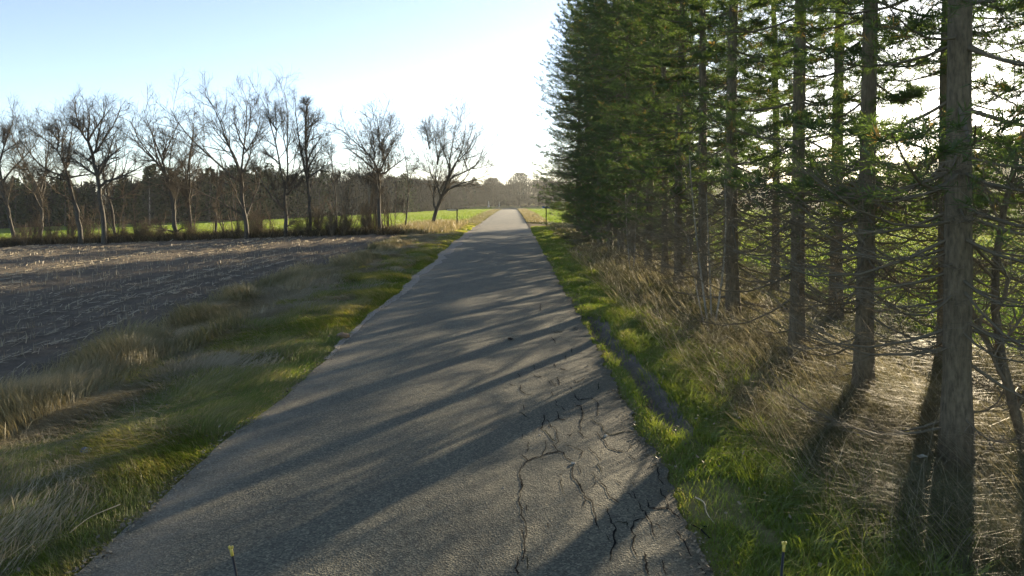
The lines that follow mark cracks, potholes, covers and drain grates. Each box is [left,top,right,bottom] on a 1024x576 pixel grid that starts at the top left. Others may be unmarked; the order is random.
crack [509,331,710,575]
